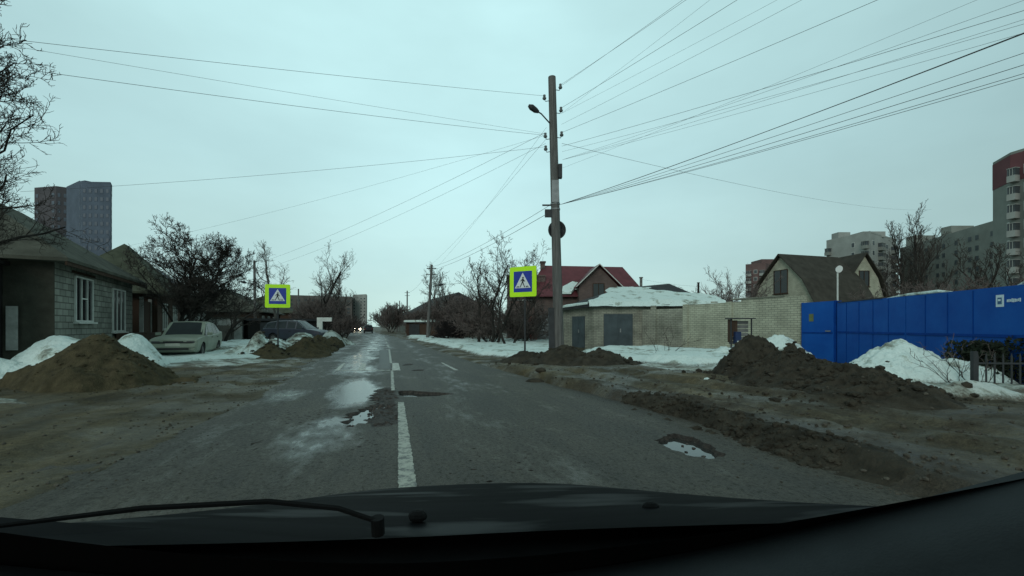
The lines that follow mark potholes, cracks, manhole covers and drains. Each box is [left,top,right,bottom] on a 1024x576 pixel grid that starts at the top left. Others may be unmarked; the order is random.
pothole [341,387,401,427]
pothole [654,433,726,459]
